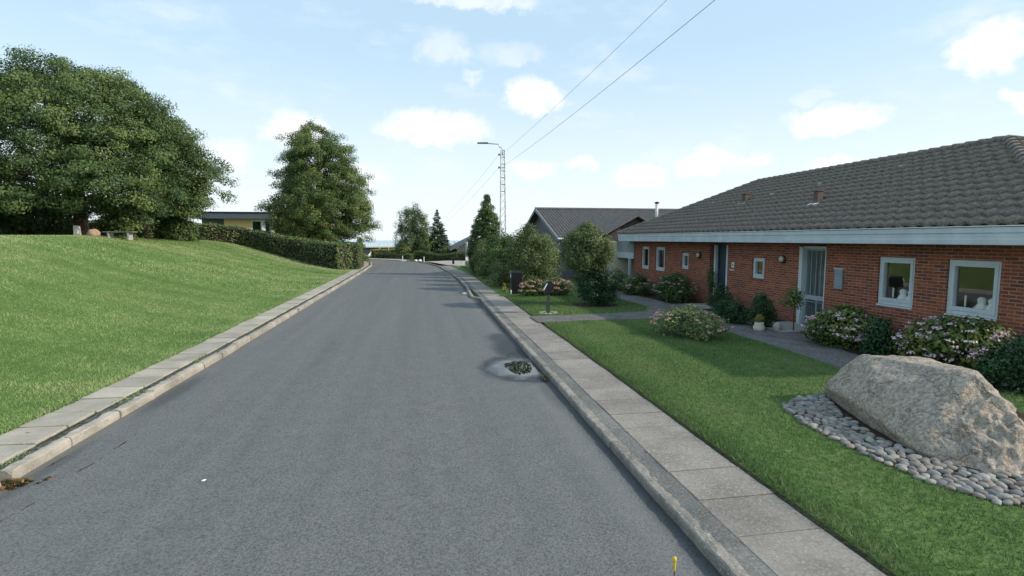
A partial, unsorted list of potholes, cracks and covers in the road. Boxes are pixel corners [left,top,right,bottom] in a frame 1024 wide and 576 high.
crack [0,434,135,522]
